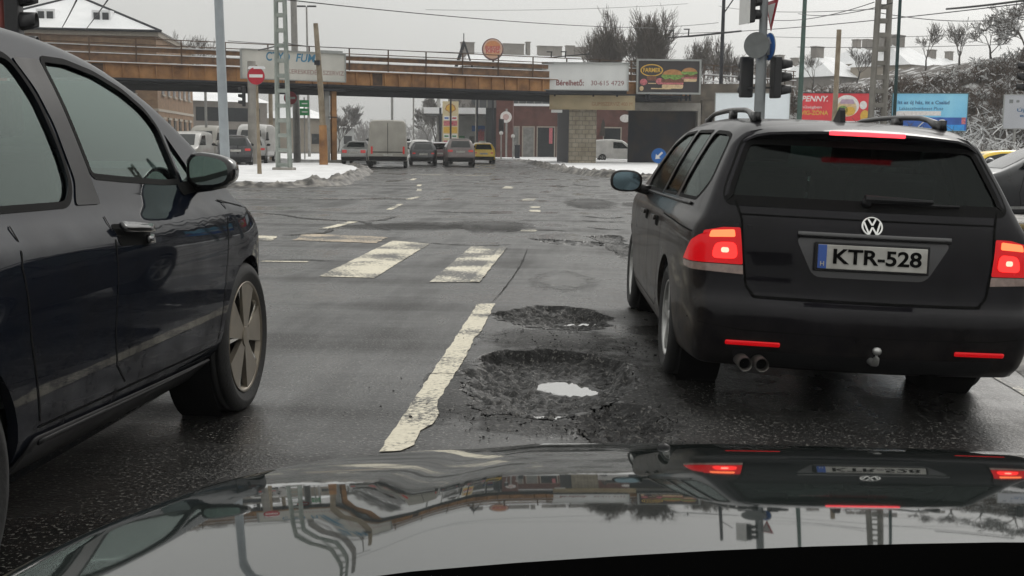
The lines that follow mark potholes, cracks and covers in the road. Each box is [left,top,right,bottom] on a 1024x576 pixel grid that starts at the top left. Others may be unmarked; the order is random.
pothole [490,305,614,331]
pothole [586,235,629,259]
pothole [457,347,644,421]
